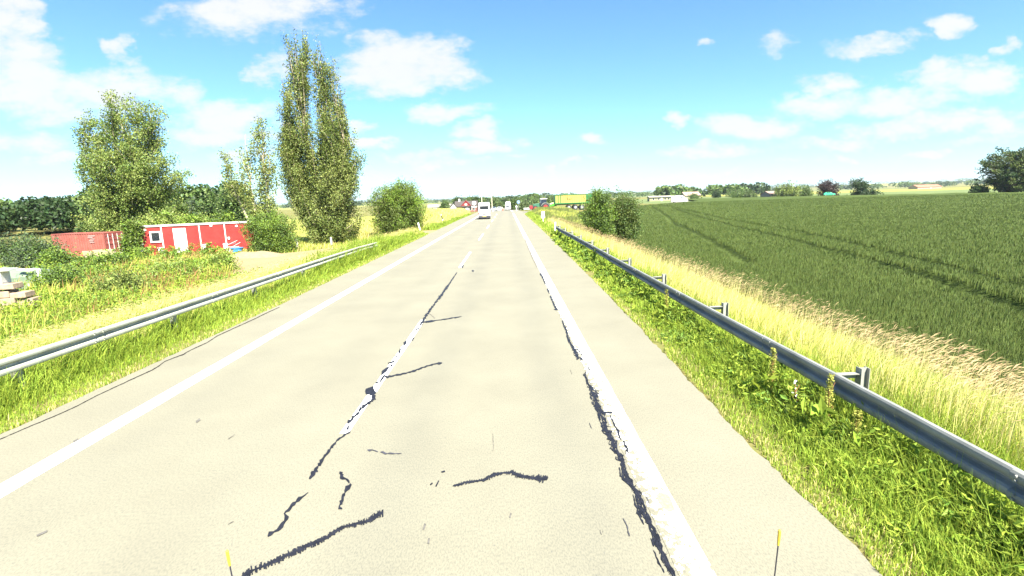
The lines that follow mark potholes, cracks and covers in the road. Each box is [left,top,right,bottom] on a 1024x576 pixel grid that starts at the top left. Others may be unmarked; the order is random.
crack [346,395,376,430]
crack [384,362,442,378]
crack [540,273,694,576]
